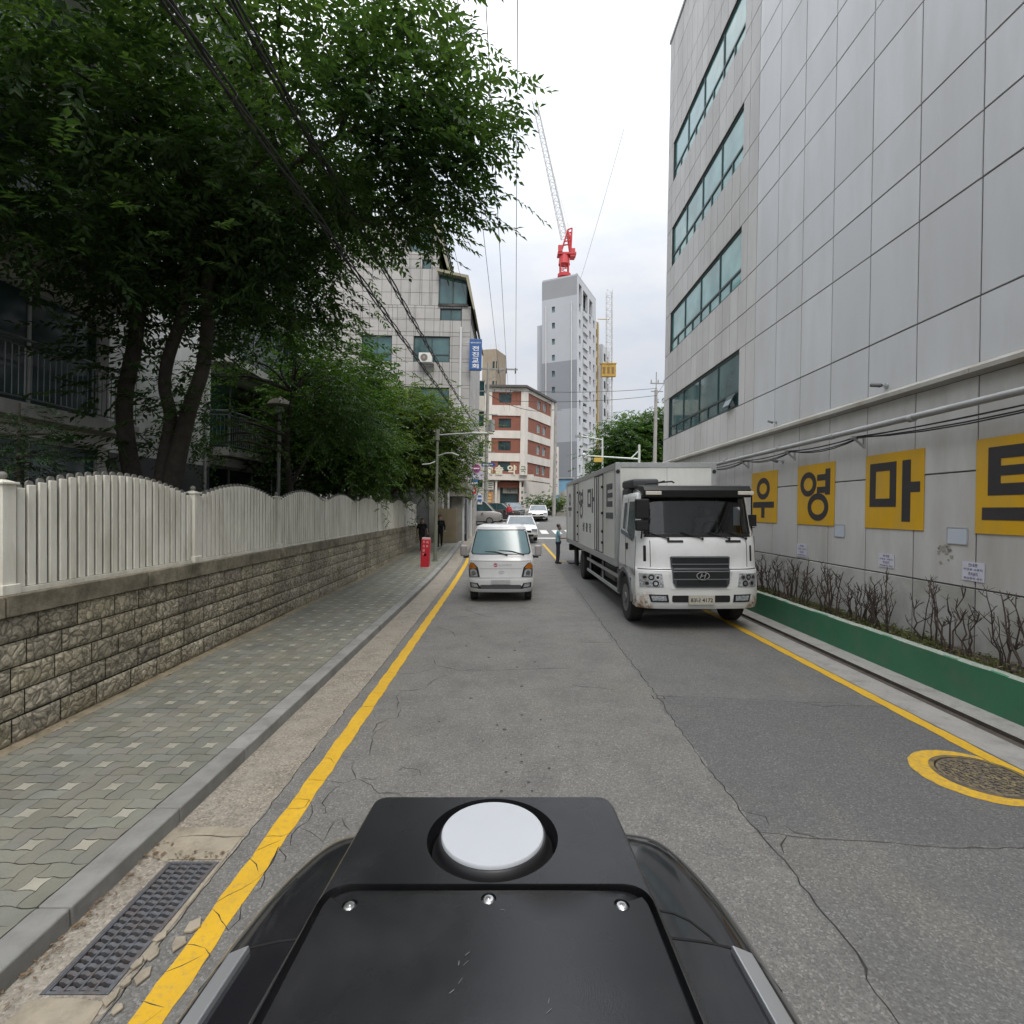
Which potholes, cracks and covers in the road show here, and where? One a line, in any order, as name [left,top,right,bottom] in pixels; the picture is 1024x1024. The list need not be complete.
crack [195,661,551,969]
drain grate [40,862,219,1024]
crack [581,594,1024,1024]
manhole cover [928,755,1024,799]
